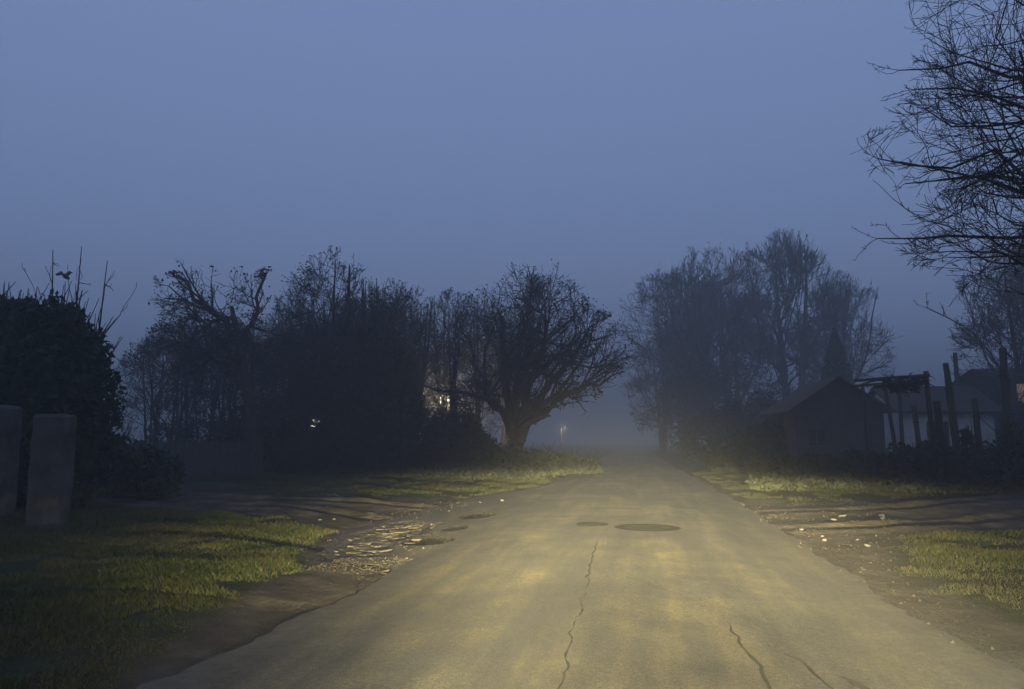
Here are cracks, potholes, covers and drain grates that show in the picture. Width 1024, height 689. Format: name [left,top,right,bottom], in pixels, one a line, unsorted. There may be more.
pothole [400,537,456,546]
crack [557,540,598,689]
pothole [458,512,496,520]
crack [727,621,870,689]
